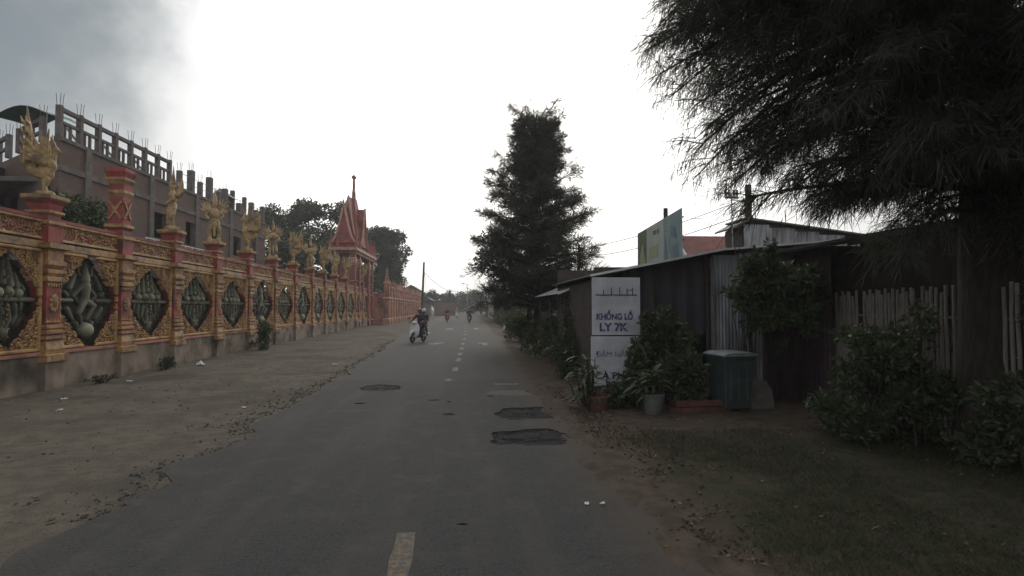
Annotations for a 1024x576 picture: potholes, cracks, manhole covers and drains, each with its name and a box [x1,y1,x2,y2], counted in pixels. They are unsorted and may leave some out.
pothole [490,428,571,446]
pothole [494,407,555,420]
